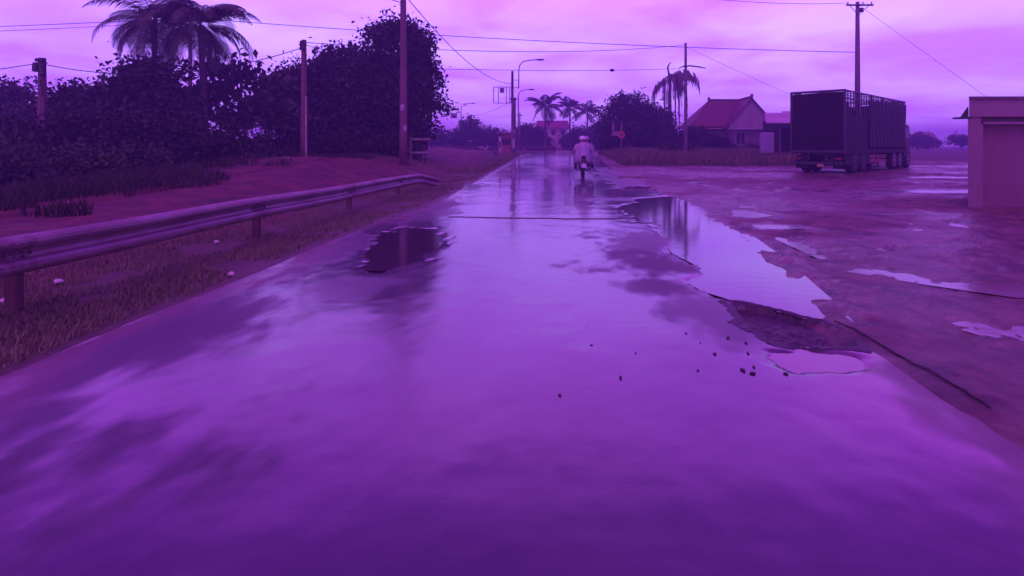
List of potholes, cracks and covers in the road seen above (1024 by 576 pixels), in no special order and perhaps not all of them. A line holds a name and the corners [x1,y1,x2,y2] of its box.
crack [834,320,991,408]
pothole [717,299,872,354]
